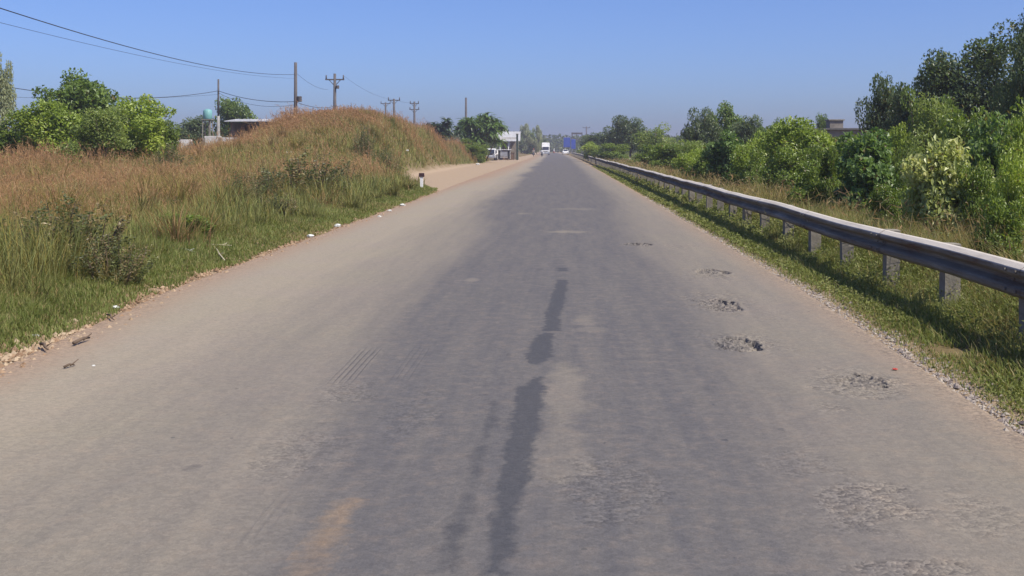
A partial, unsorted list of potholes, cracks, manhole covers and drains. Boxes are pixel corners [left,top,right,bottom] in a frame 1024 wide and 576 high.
pothole [689,268,737,278]
pothole [703,335,771,355]
pothole [832,371,897,391]
pothole [691,297,751,315]
